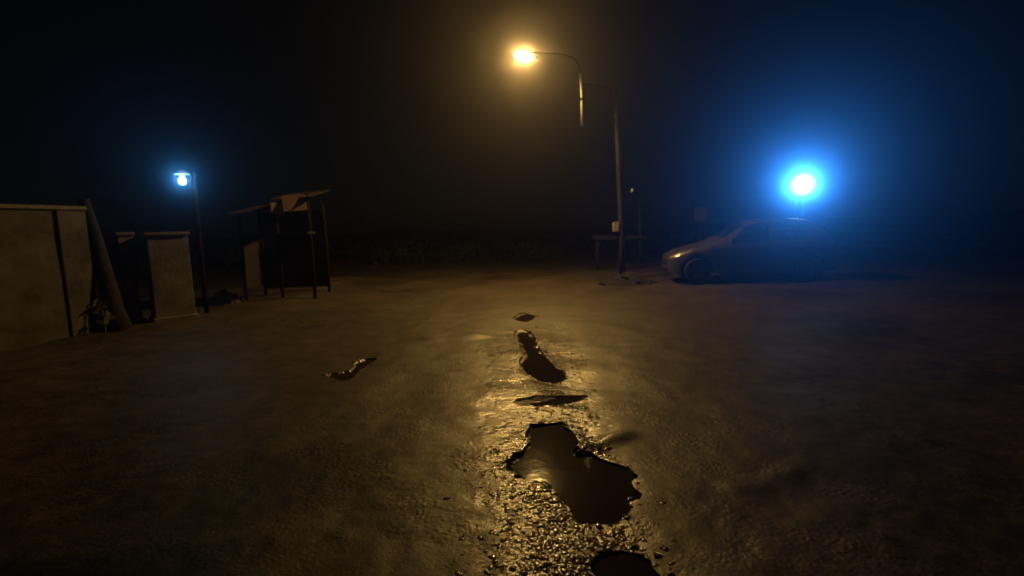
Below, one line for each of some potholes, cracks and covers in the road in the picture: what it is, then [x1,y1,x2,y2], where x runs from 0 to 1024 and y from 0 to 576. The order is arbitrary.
pothole [321,358,377,381]
pothole [511,393,592,409]
pothole [512,330,567,383]
pothole [585,544,675,576]
pothole [499,421,642,529]
pothole [512,312,539,322]
